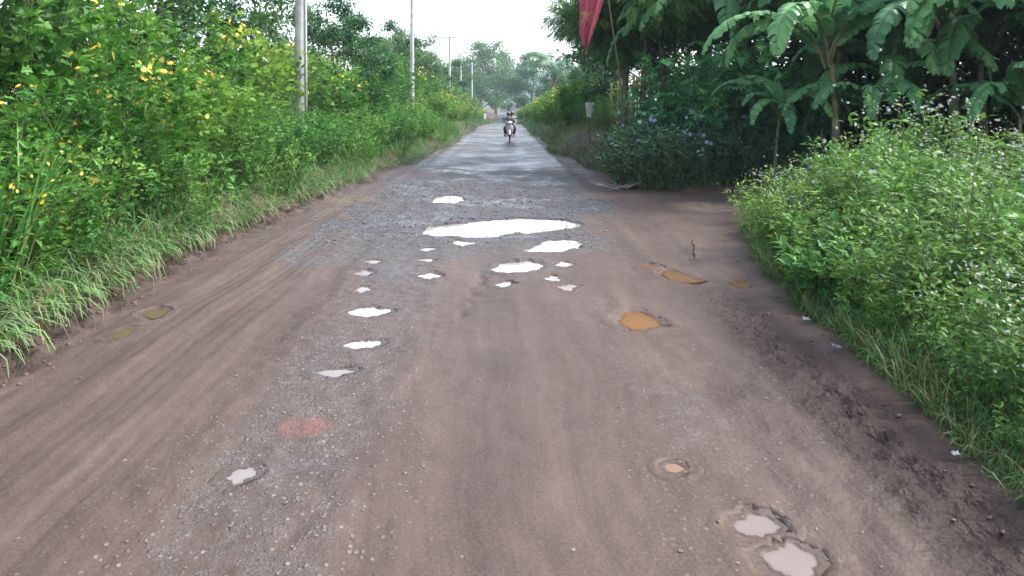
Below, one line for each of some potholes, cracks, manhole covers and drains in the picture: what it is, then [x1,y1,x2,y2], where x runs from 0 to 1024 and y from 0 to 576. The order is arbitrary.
pothole [646,453,704,482]
pothole [705,498,807,551]
pothole [336,302,407,321]
pothole [630,261,670,270]
pothole [207,459,275,496]
pothole [443,238,482,247]
pothole [599,304,684,334]
pothole [649,265,716,286]
pothole [324,334,400,355]
pothole [718,518,863,576]
pothole [410,215,591,239]
pothole [425,193,471,204]
